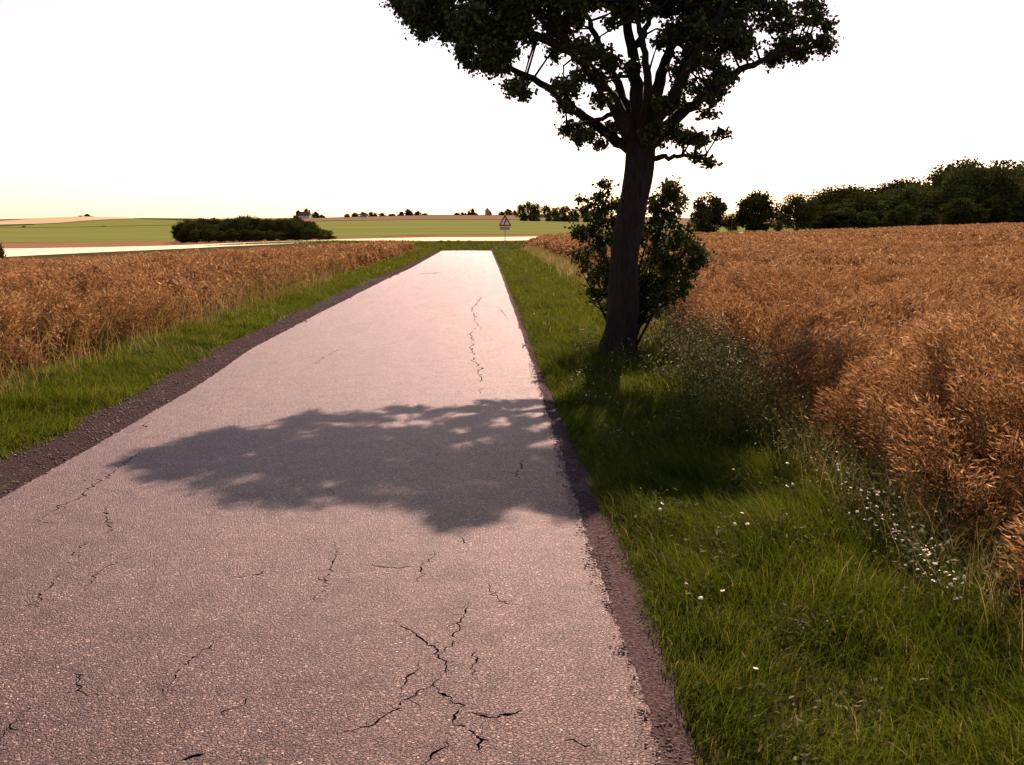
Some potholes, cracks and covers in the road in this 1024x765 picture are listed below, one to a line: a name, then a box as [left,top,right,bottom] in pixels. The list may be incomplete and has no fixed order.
crack [306,544,346,608]
crack [366,537,465,583]
crack [36,447,147,534]
crack [68,670,99,696]
crack [162,637,220,696]
crack [470,298,506,393]
crack [340,583,521,765]
